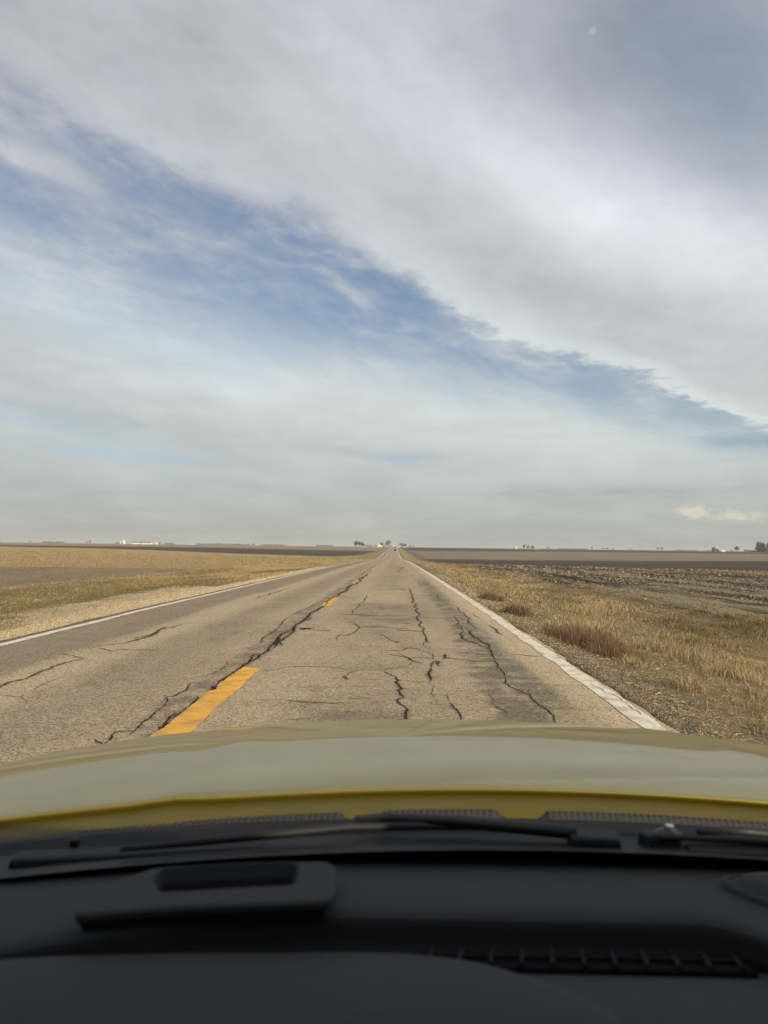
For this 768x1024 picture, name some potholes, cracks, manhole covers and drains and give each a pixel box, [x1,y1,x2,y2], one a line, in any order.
crack [248,567,570,723]
crack [0,589,285,744]
